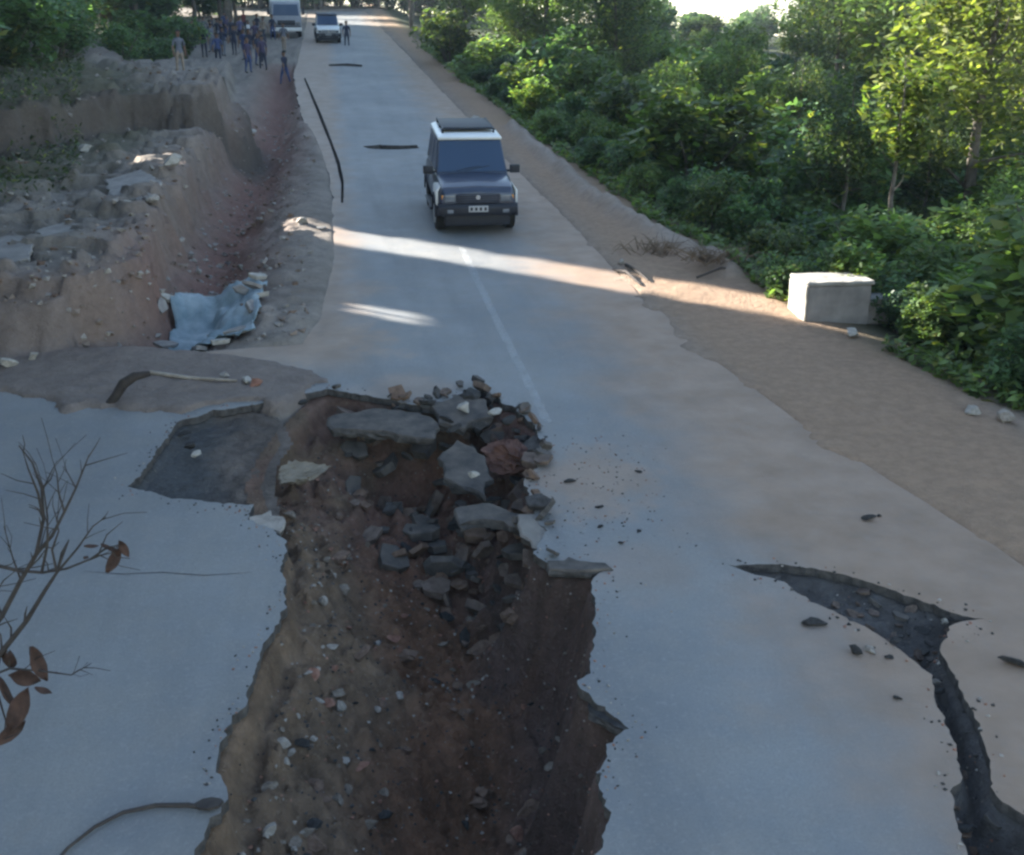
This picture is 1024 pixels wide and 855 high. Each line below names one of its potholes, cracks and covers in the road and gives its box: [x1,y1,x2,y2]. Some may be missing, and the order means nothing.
crack [751,572,1024,855]
pothole [135,411,293,516]
crack [305,65,362,203]
